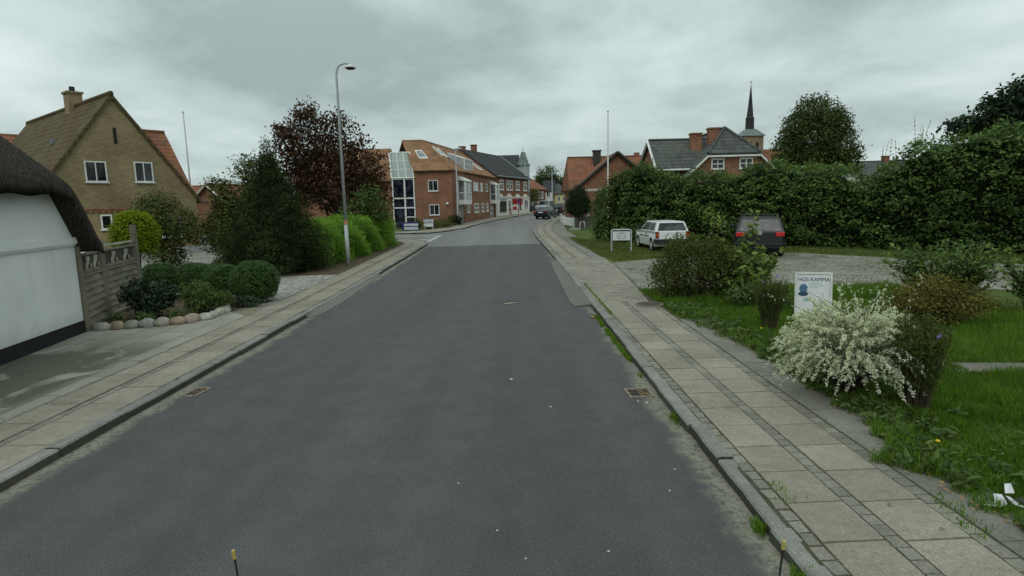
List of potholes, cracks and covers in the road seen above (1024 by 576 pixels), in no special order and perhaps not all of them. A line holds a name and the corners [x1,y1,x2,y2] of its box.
drain grate [623,387,655,398]
drain grate [180,387,212,397]
